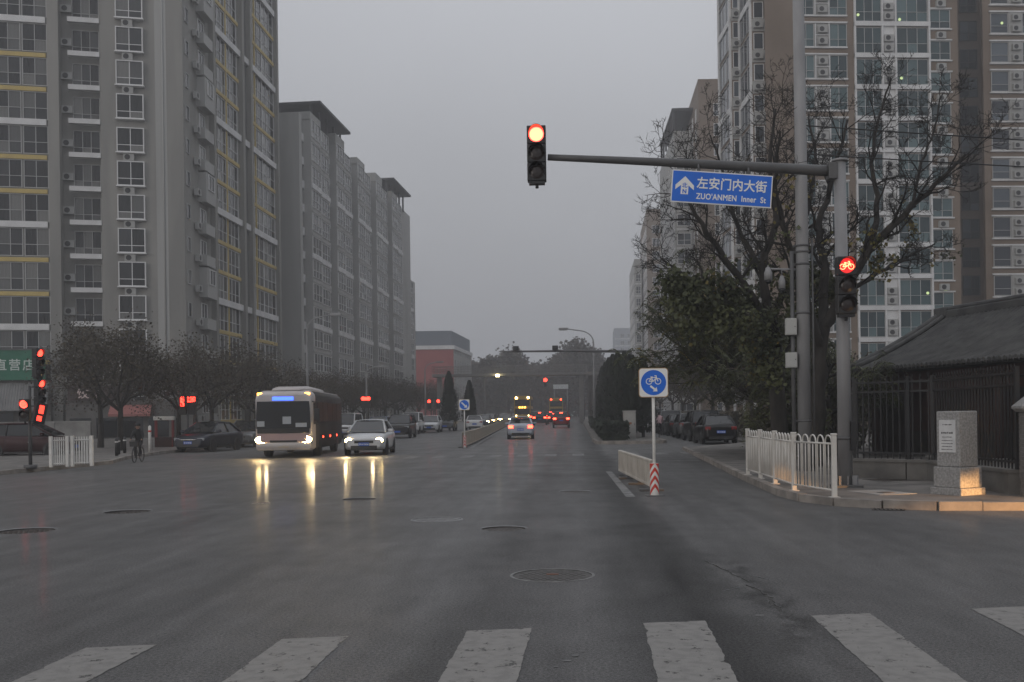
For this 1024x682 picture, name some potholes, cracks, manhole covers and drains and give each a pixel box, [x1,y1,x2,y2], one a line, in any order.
manhole cover [510,568,595,582]
crack [704,560,782,612]
